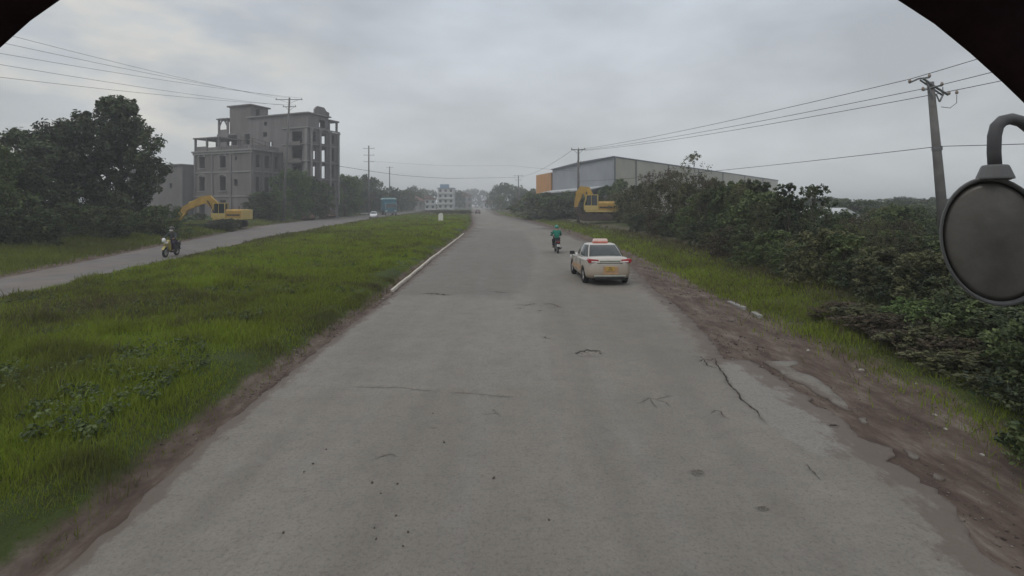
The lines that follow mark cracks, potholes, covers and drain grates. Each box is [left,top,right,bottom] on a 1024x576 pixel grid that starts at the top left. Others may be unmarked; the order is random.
crack [699,357,763,420]
